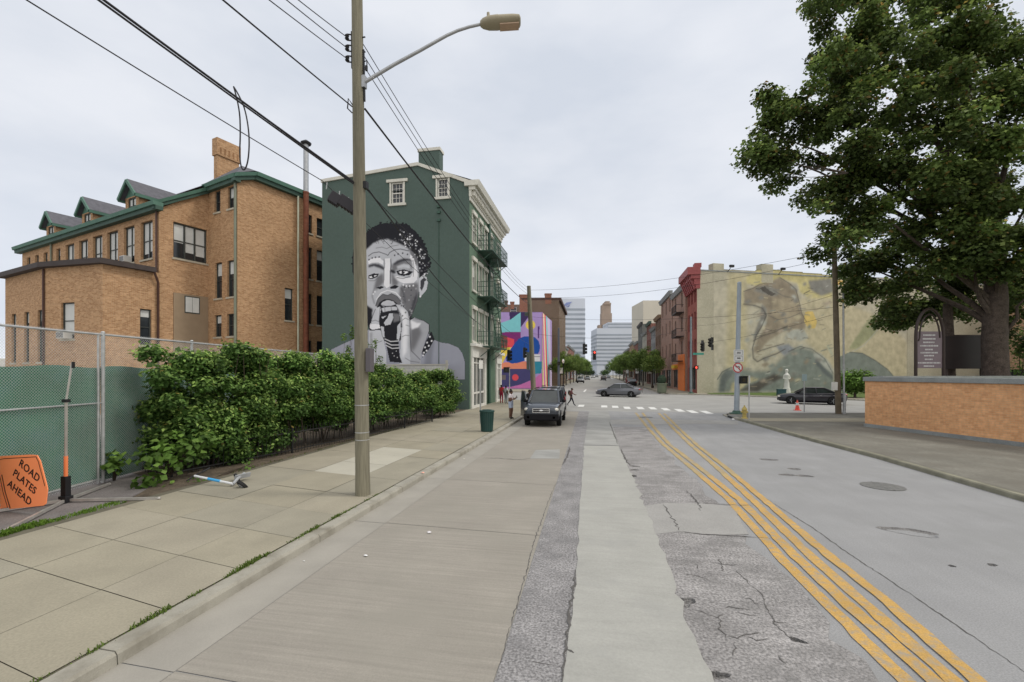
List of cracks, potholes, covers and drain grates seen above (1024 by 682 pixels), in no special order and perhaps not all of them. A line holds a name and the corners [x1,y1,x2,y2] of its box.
manhole cover [860,482,907,491]
crack [663,491,763,538]
crack [688,559,792,663]
